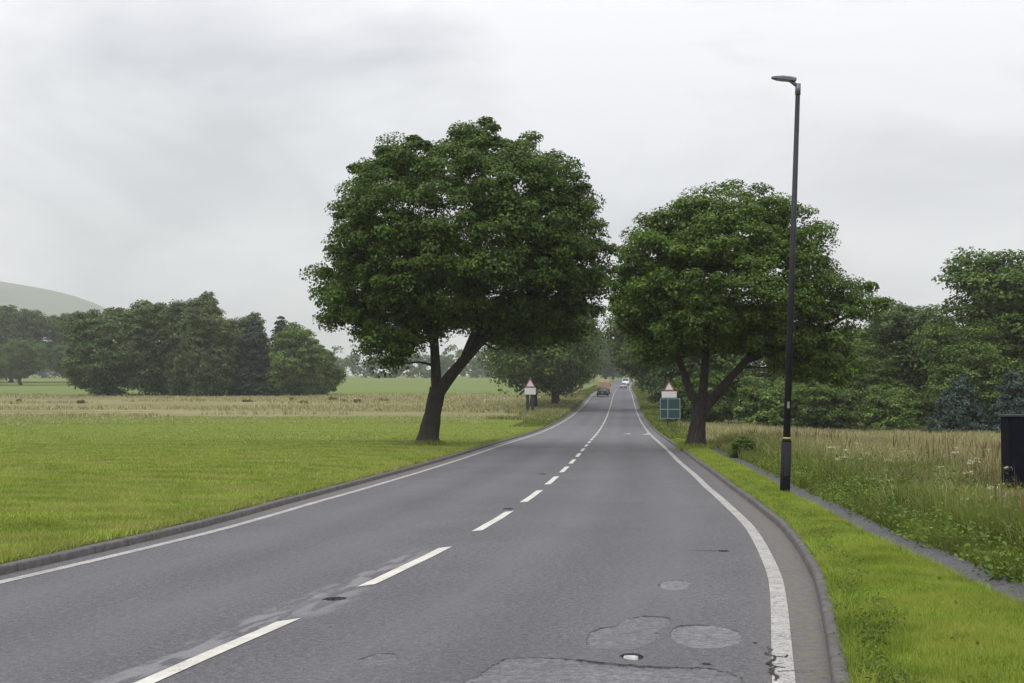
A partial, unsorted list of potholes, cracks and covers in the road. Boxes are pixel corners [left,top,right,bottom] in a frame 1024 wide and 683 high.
crack [764,646,812,680]
